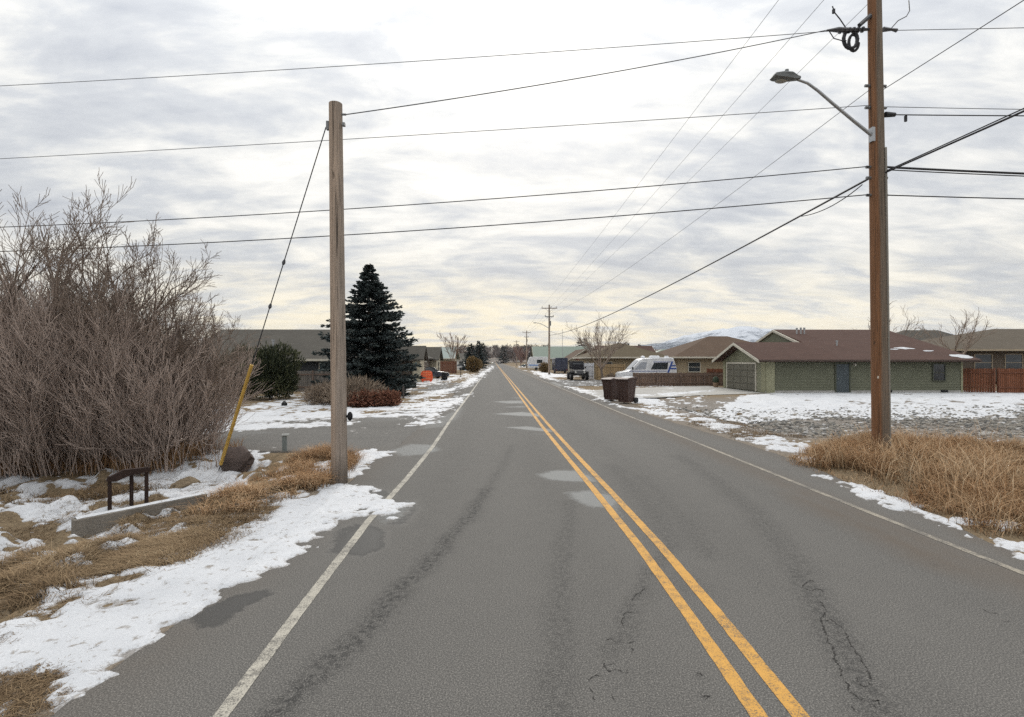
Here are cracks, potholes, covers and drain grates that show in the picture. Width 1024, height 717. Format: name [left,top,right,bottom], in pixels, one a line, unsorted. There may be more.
crack [588,588,645,699]
crack [802,580,880,713]
